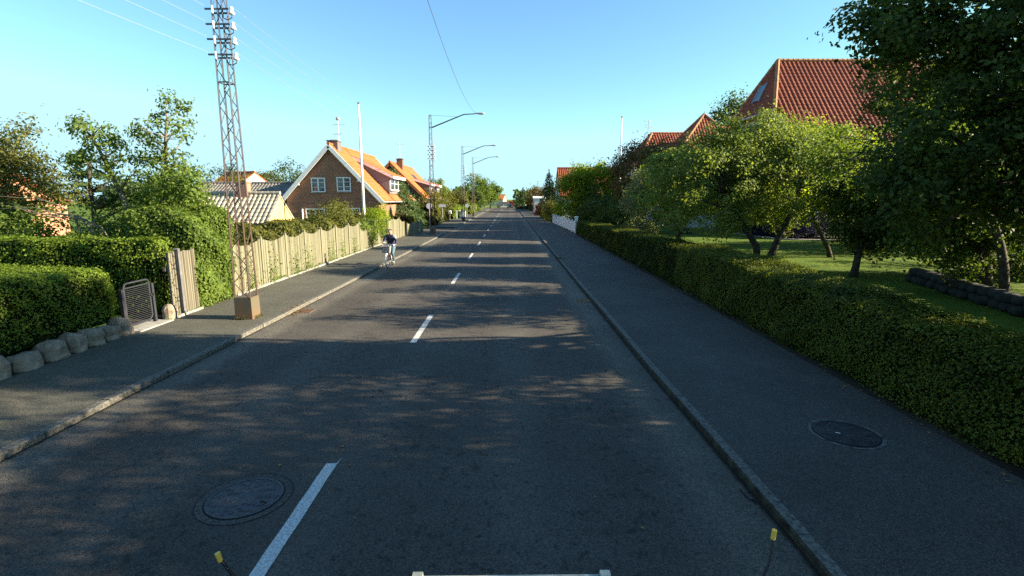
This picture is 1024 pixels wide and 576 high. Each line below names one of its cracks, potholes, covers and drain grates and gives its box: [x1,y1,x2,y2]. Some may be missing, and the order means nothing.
manhole cover [193,473,294,525]
manhole cover [808,419,887,450]
